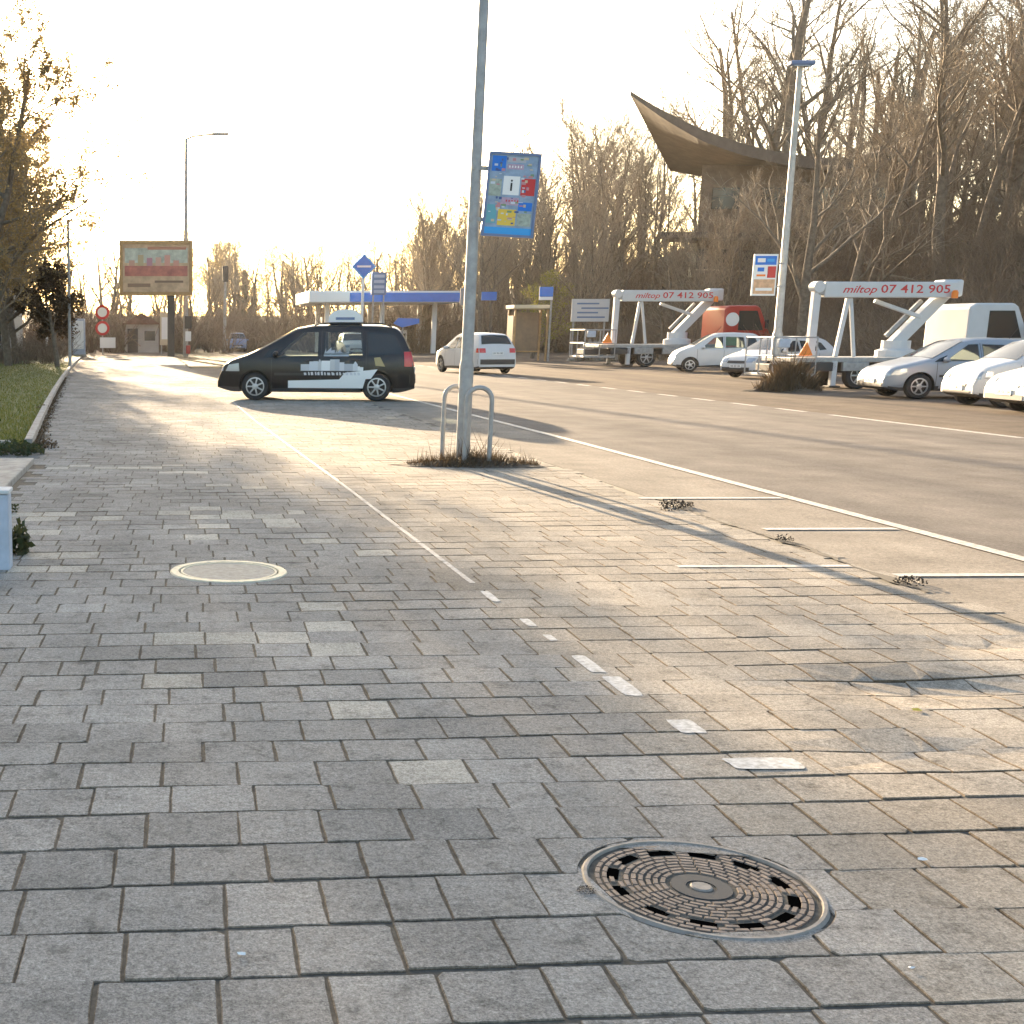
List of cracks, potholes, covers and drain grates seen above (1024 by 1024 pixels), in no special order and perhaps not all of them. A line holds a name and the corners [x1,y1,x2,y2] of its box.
manhole cover [170,560,287,583]
manhole cover [581,840,831,940]
